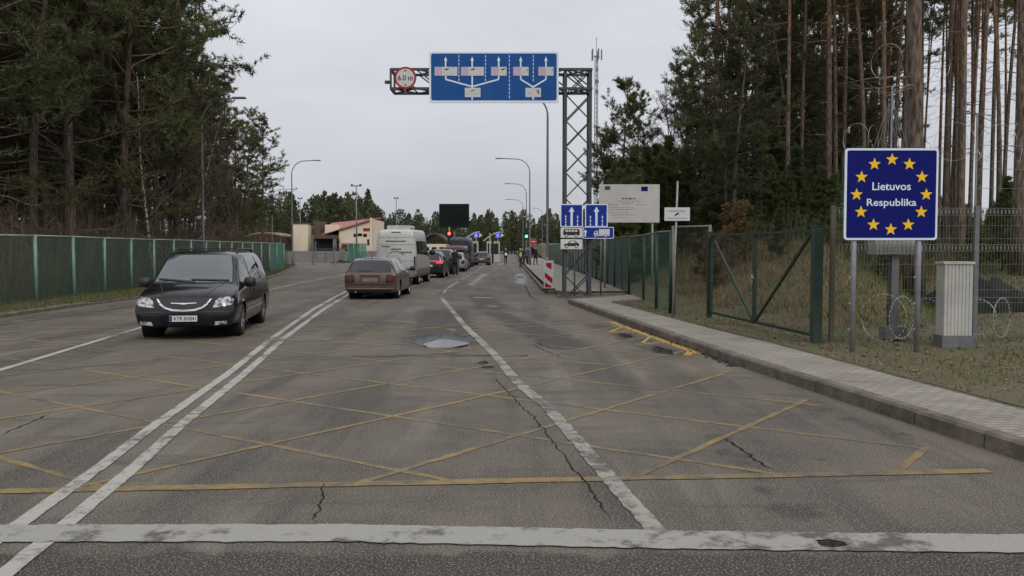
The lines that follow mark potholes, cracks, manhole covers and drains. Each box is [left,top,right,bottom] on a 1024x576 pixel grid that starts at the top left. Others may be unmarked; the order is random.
crack [726,439,772,469]
pothole [651,346,674,355]
crack [2,414,49,435]
crack [312,483,325,522]
